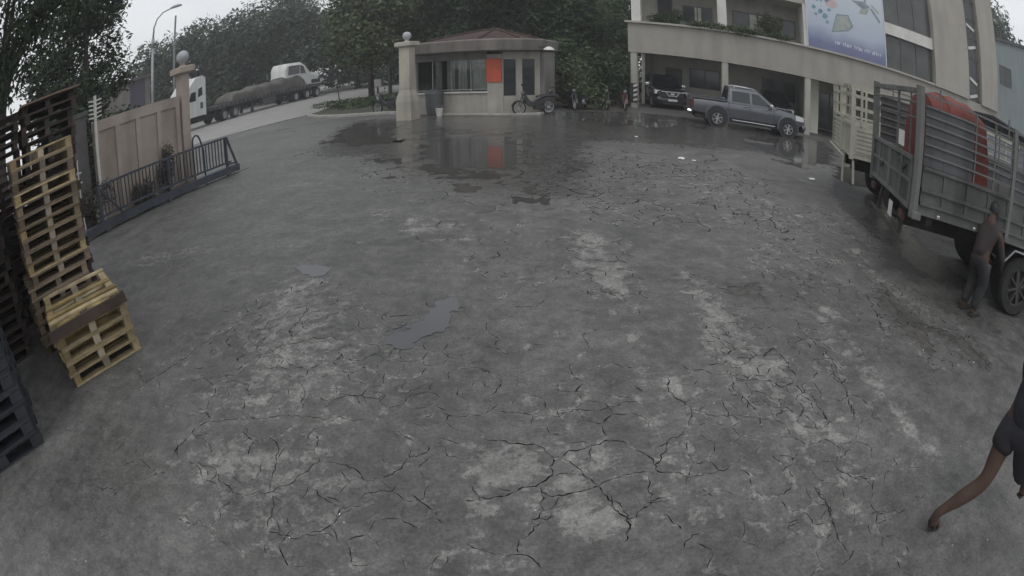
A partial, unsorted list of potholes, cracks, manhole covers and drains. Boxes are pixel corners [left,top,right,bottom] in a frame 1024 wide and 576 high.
crack [112,147,991,576]
